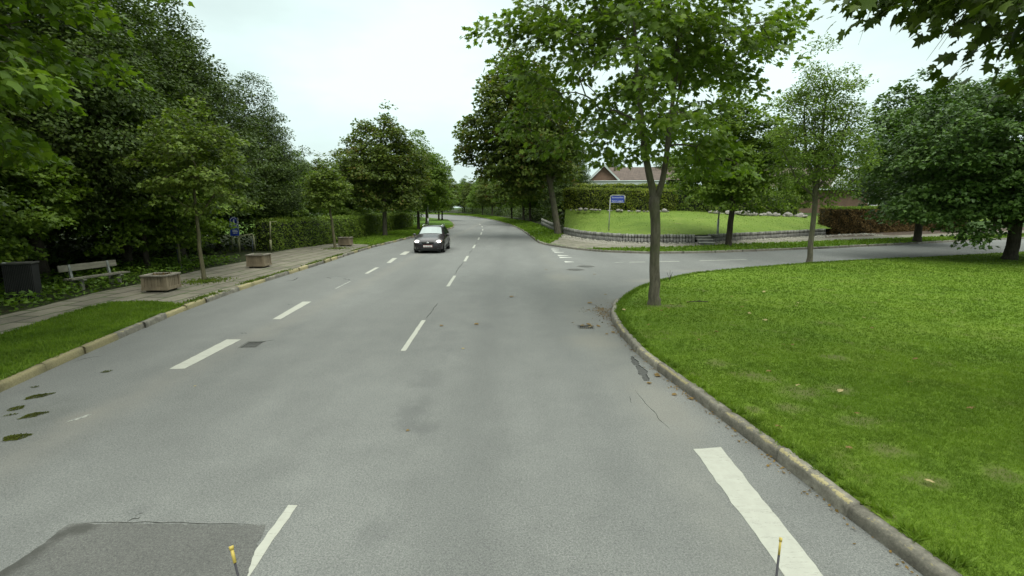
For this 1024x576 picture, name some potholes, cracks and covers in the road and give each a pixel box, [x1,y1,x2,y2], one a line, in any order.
pothole [630,356,649,381]
